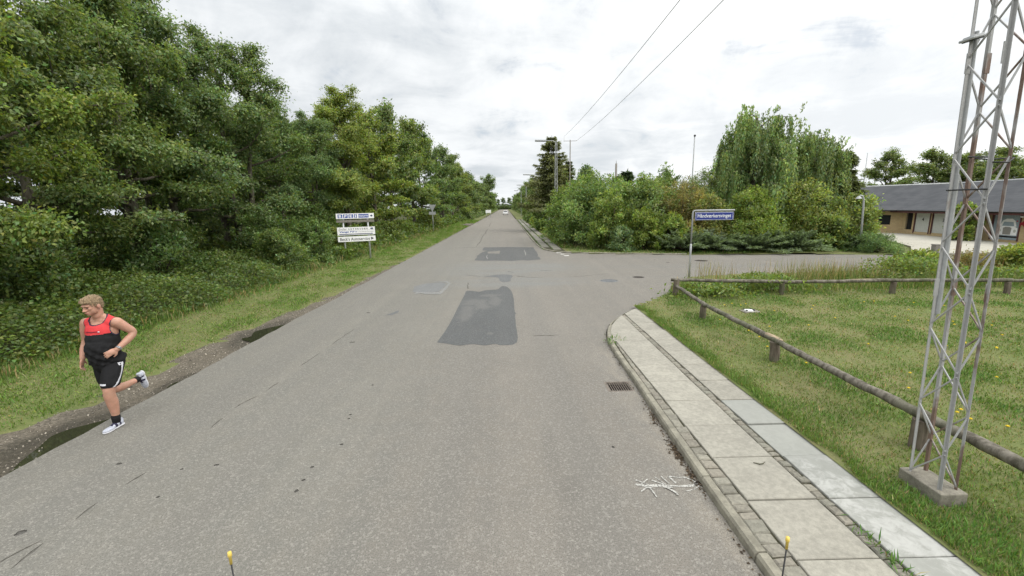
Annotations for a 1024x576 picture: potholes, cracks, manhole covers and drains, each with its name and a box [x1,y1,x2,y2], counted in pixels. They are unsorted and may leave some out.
crack [0,473,145,569]
drain grate [604,381,635,392]
